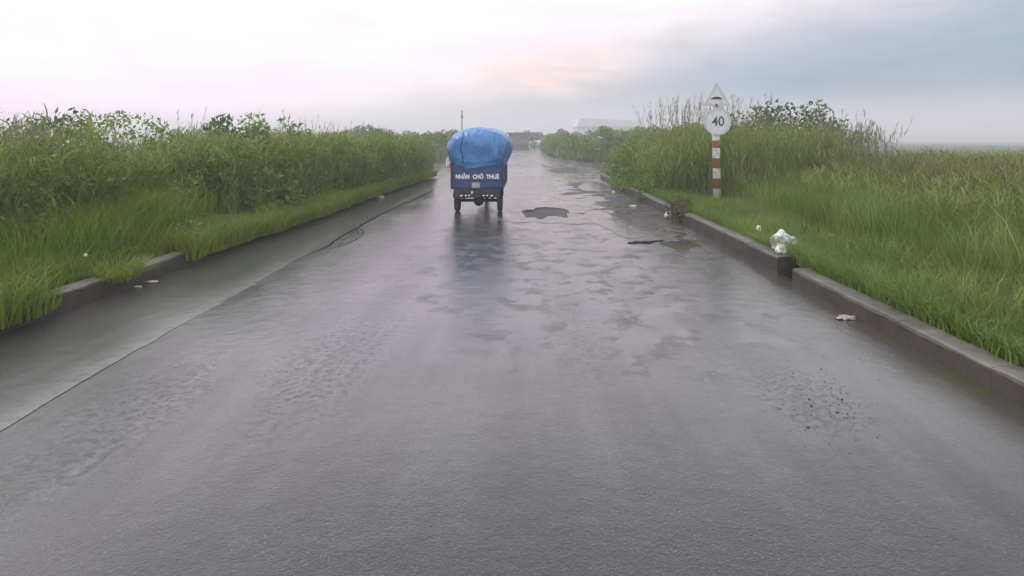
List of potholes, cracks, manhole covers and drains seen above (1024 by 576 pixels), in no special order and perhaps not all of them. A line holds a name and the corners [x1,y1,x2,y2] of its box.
pothole [522,207,569,219]
